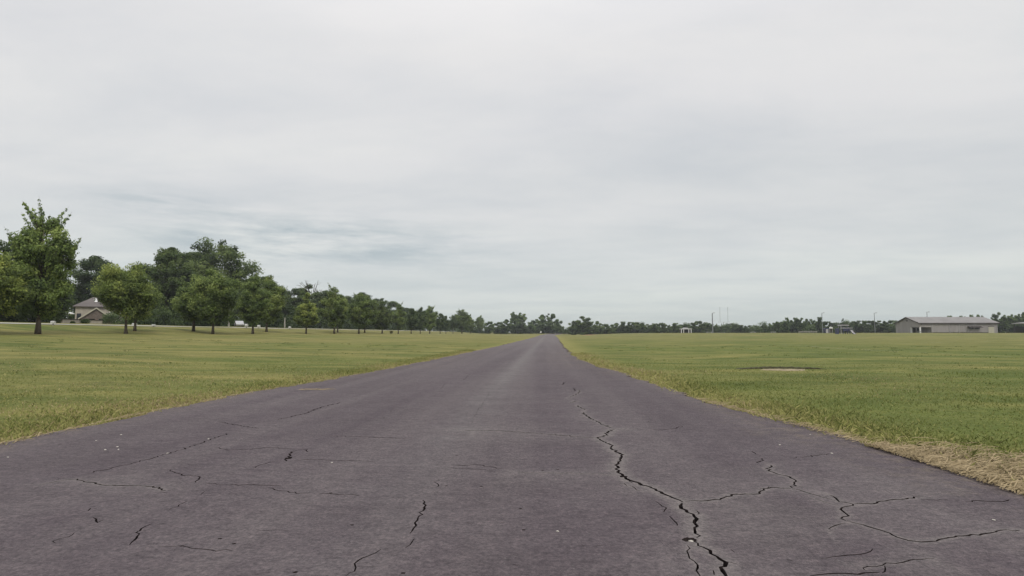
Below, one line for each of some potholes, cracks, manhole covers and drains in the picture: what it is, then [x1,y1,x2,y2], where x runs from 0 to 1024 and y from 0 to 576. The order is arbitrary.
crack [468,383,1019,576]
crack [407,482,439,547]
crack [56,422,308,508]
